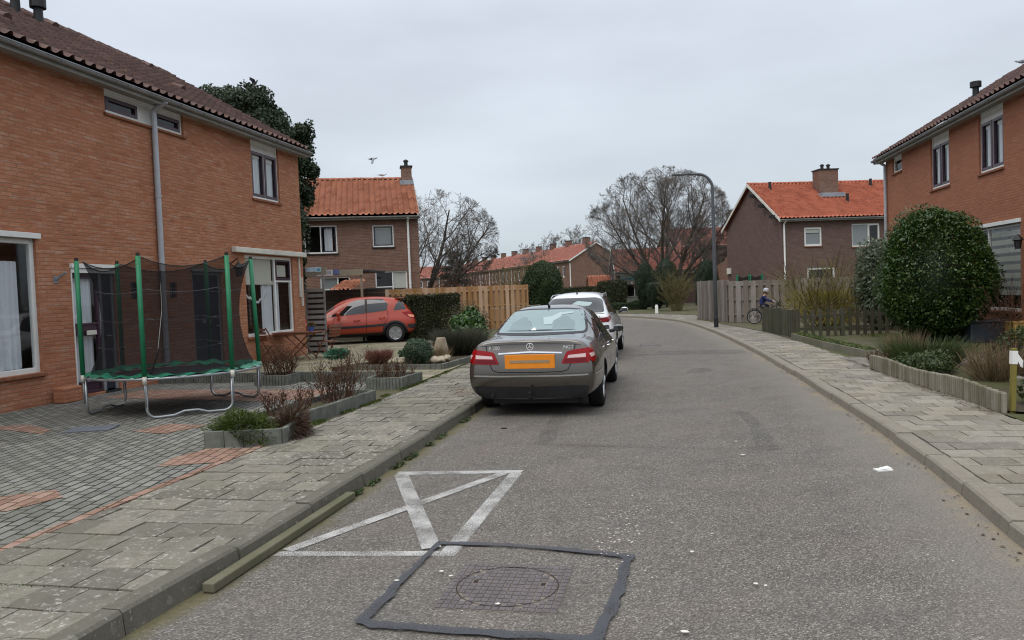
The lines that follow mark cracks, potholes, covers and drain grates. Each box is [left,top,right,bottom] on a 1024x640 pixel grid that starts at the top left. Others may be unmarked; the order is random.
manhole cover [433,563,574,615]
